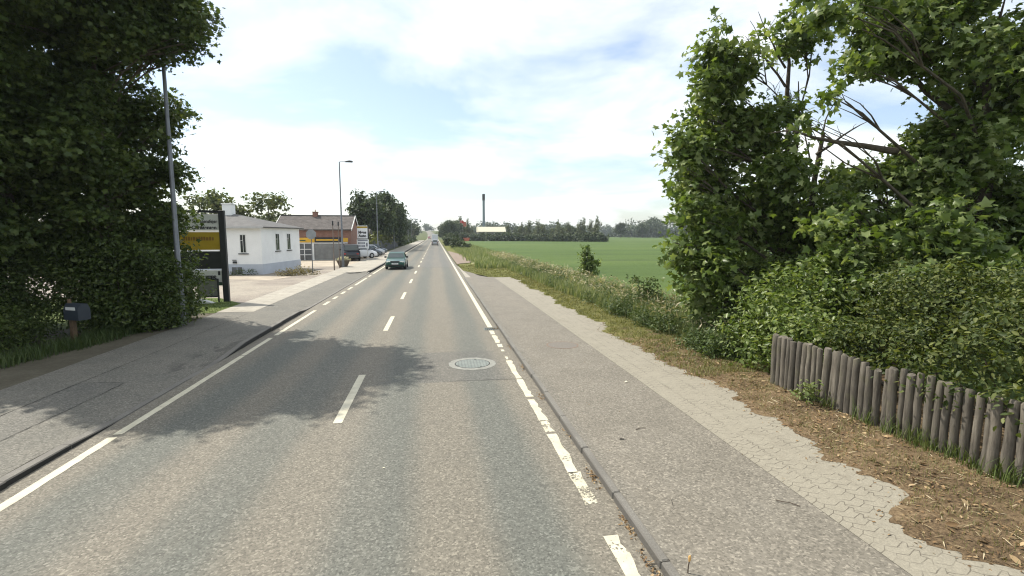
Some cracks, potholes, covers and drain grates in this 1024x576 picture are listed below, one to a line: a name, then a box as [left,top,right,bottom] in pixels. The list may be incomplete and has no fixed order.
manhole cover [449,358,496,370]
